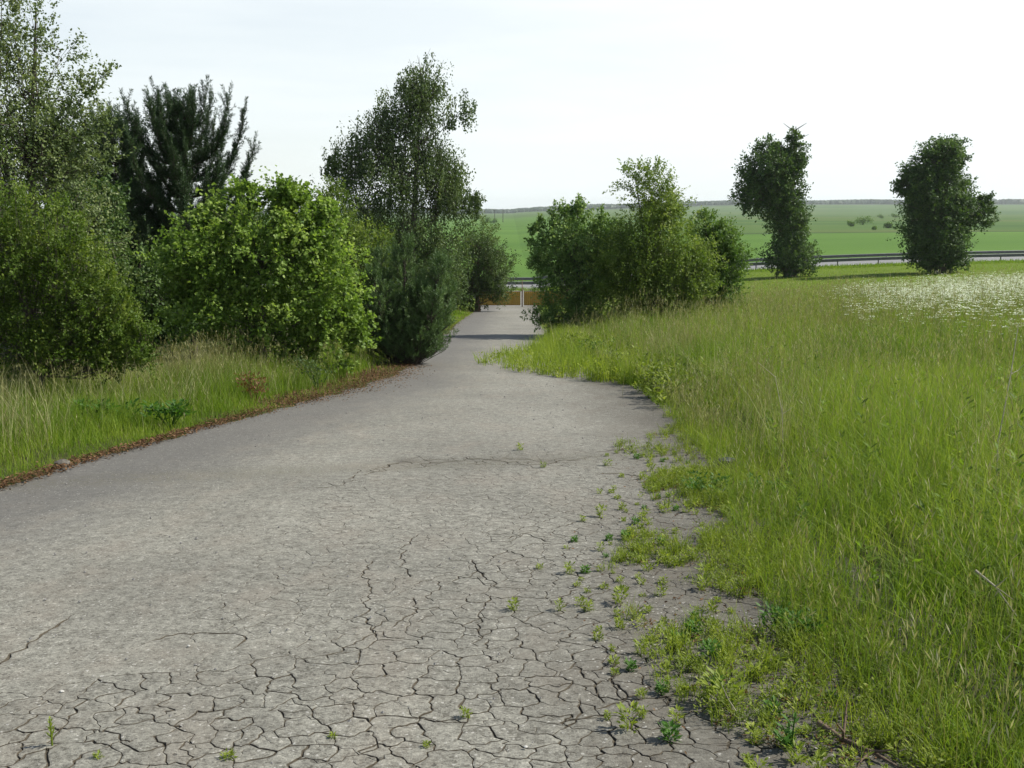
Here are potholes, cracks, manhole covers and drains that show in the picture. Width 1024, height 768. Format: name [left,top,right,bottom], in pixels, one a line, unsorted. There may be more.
crack [0,447,1021,768]
